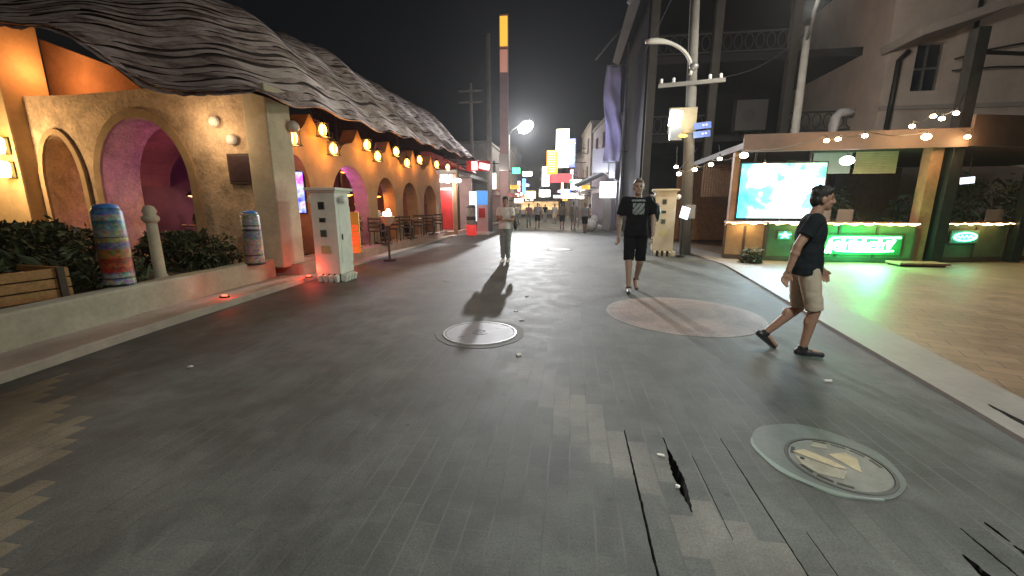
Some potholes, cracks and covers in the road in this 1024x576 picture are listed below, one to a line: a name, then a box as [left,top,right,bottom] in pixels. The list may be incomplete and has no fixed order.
crack [960,528,1018,576]
crack [624,430,660,576]
manhole cover [750,424,906,501]
manhole cover [435,320,523,348]
crack [692,439,838,576]
